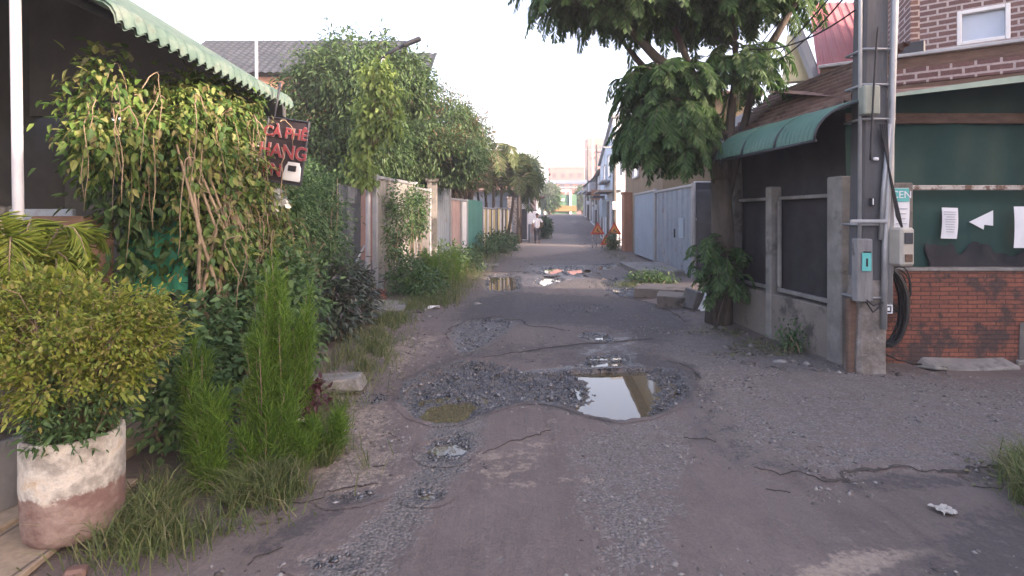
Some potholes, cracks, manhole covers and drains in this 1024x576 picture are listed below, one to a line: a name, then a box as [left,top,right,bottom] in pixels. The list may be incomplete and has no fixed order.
pothole [526,265,602,276]
pothole [570,329,622,343]
pothole [398,479,458,507]
pothole [477,272,528,294]
pothole [387,357,701,427]
pothole [526,274,572,288]
pothole [572,351,640,369]
pothole [309,482,393,510]
crack [754,462,1008,493]
pothole [443,316,521,356]
pothole [413,431,485,467]
